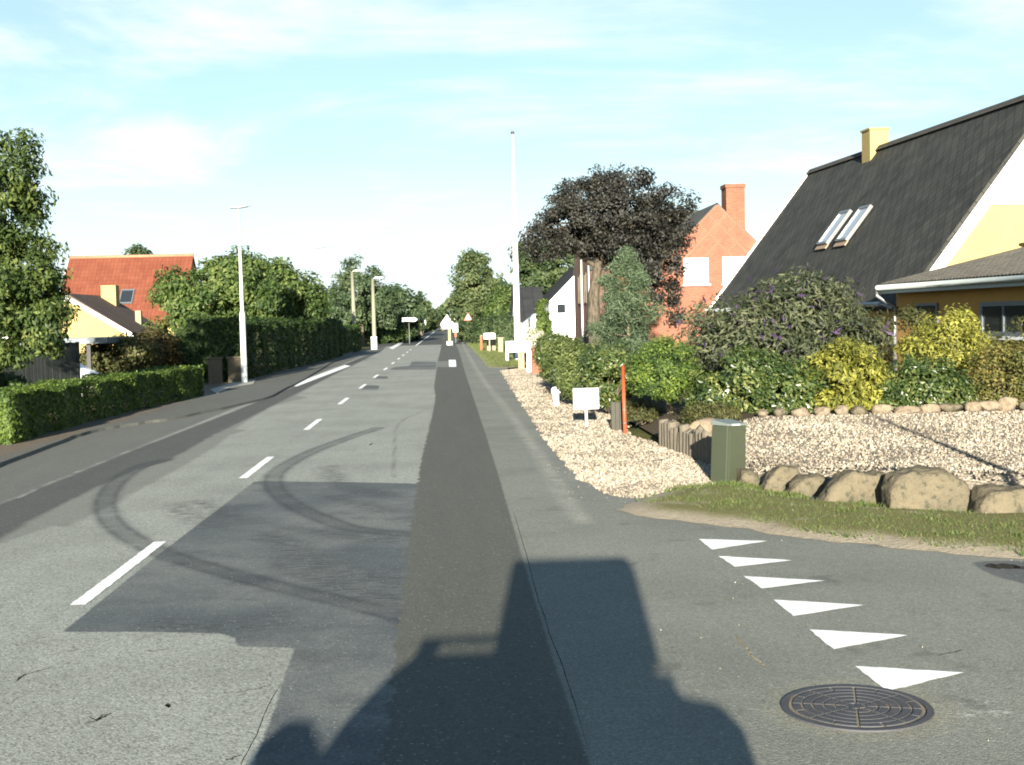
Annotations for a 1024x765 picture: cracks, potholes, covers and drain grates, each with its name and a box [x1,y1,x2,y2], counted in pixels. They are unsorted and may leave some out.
crack [85,713,111,723]
manhole cover [781,685,935,732]
crack [734,634,765,667]
